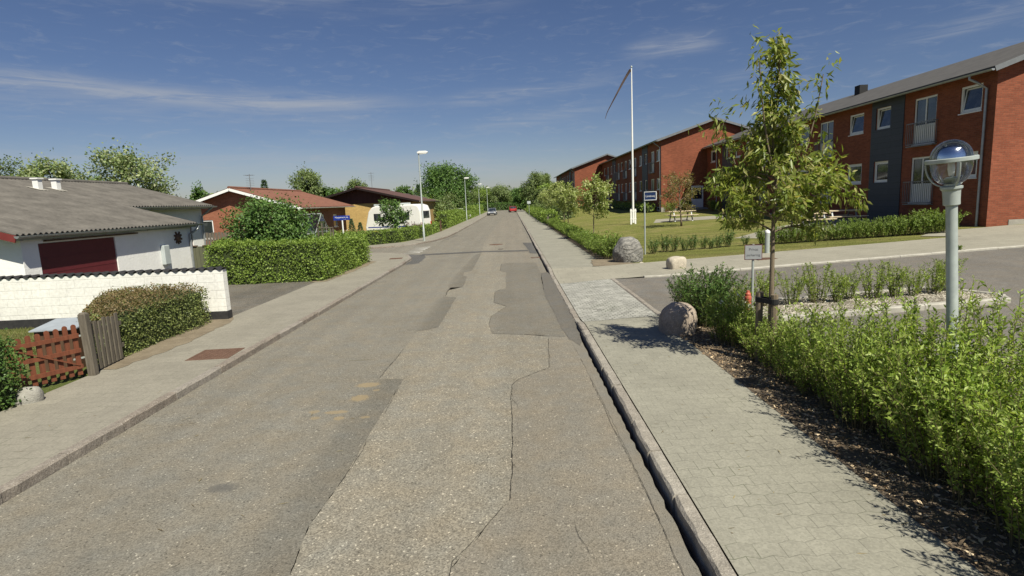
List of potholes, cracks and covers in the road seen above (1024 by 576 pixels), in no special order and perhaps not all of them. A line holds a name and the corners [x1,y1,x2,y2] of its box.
manhole cover [185,348,244,361]
crack [449,334,550,576]
